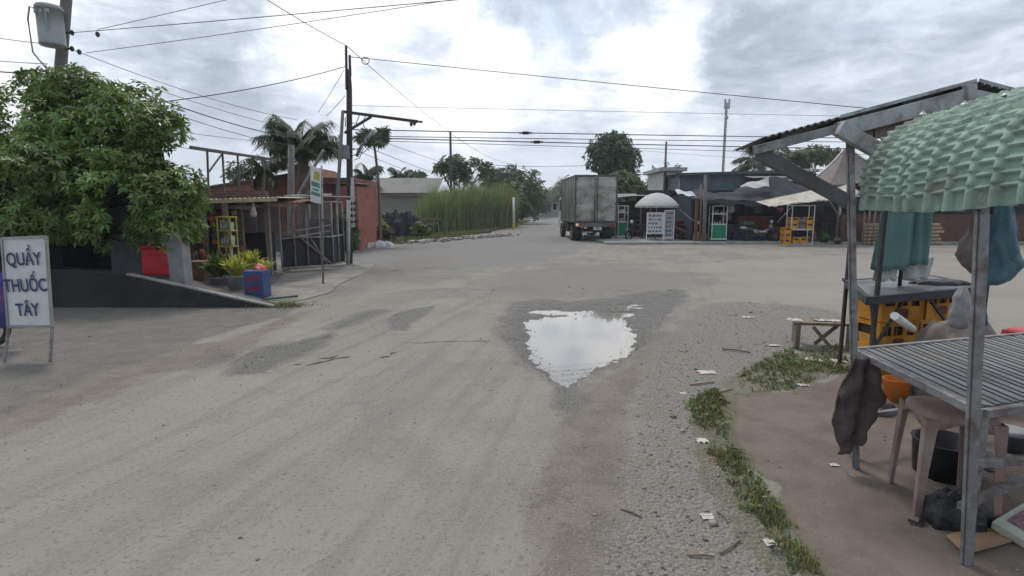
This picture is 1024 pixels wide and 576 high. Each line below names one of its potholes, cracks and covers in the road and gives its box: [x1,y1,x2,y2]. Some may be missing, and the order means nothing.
pothole [484,287,704,405]
